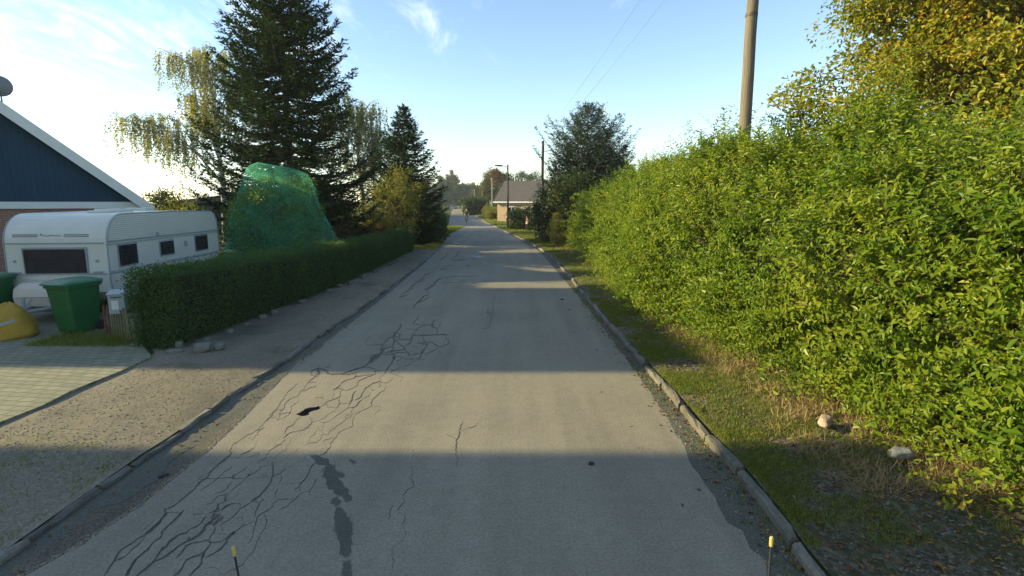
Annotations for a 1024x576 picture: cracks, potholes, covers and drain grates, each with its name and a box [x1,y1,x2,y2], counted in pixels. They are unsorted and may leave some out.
pothole [297,406,321,416]
crack [446,422,479,466]
crack [399,242,481,308]
crack [100,315,450,576]
